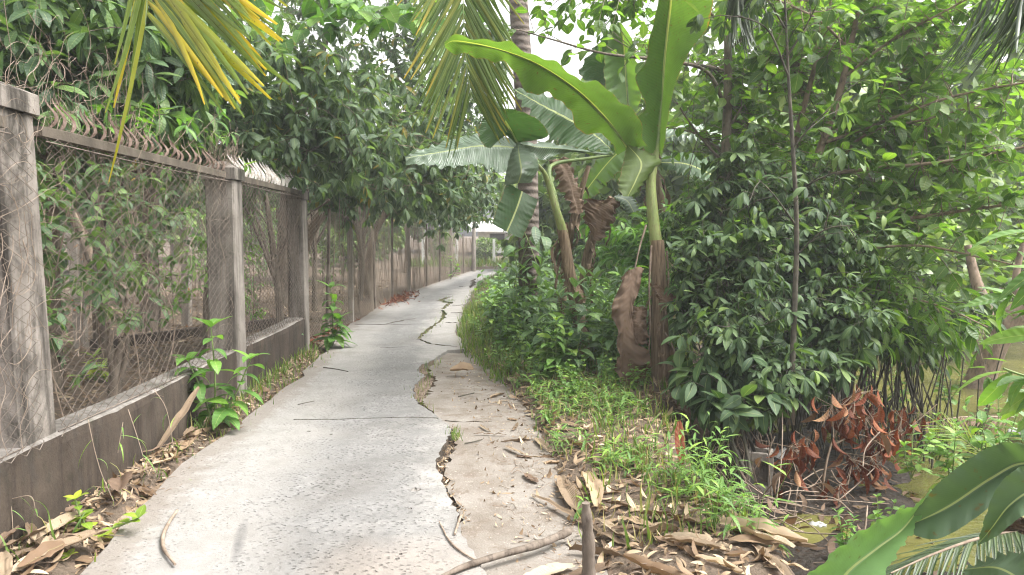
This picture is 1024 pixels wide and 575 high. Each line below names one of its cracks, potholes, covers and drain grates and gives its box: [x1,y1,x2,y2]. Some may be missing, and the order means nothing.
crack [294,279,491,524]
